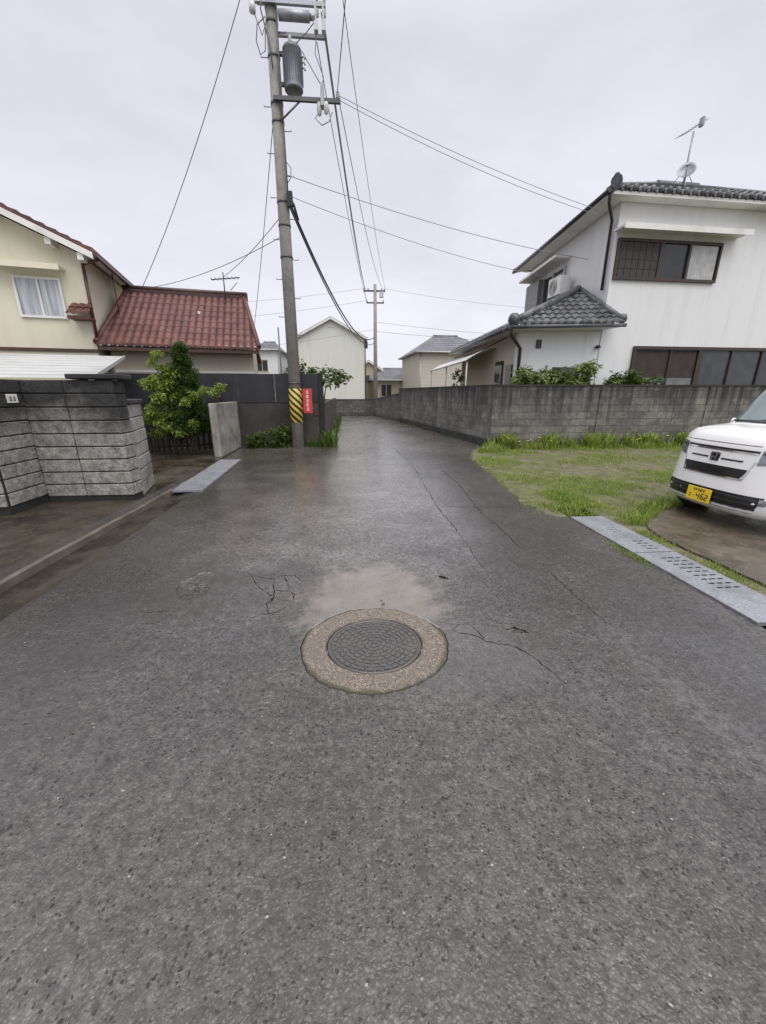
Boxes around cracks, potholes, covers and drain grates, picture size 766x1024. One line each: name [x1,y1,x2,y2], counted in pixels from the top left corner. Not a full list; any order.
crack [453,623,565,683]
crack [229,569,311,619]
manhole cover [300,608,449,696]
